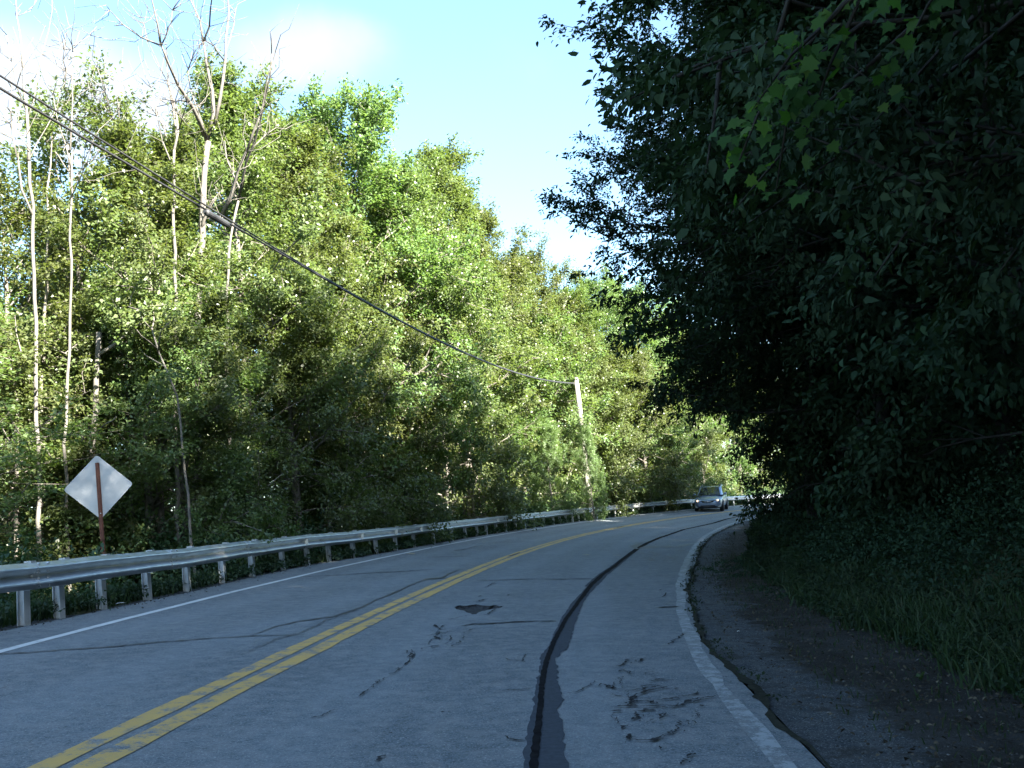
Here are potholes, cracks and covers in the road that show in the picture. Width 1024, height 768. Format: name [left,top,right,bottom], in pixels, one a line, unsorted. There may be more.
crack [568,521,832,768]
pothole [455,604,502,614]
crack [359,579,531,696]
